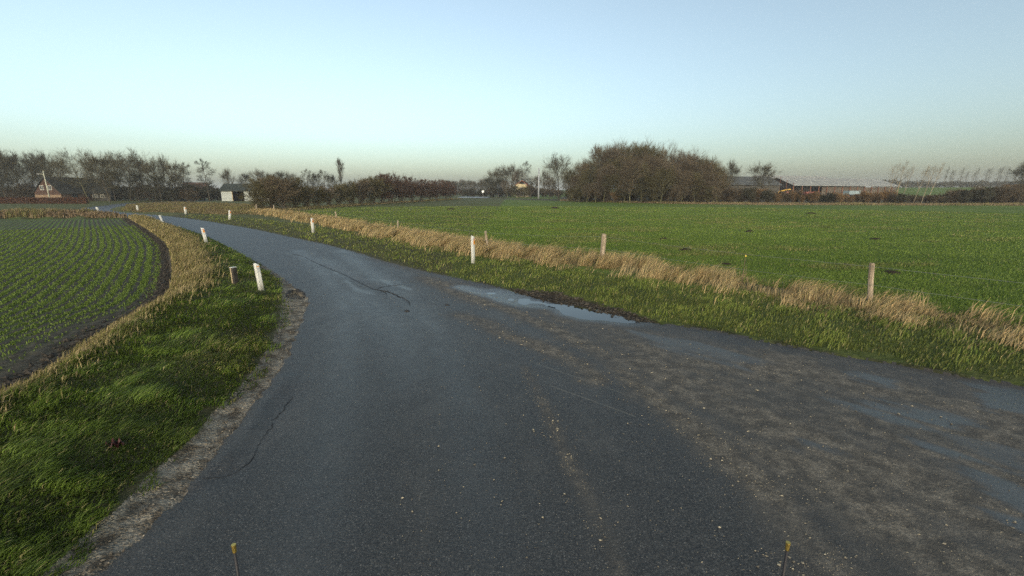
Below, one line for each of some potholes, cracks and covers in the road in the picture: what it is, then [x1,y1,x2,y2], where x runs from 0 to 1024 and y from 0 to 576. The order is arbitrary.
crack [214,397,293,478]
crack [294,254,410,304]
pothole [286,289,306,299]
